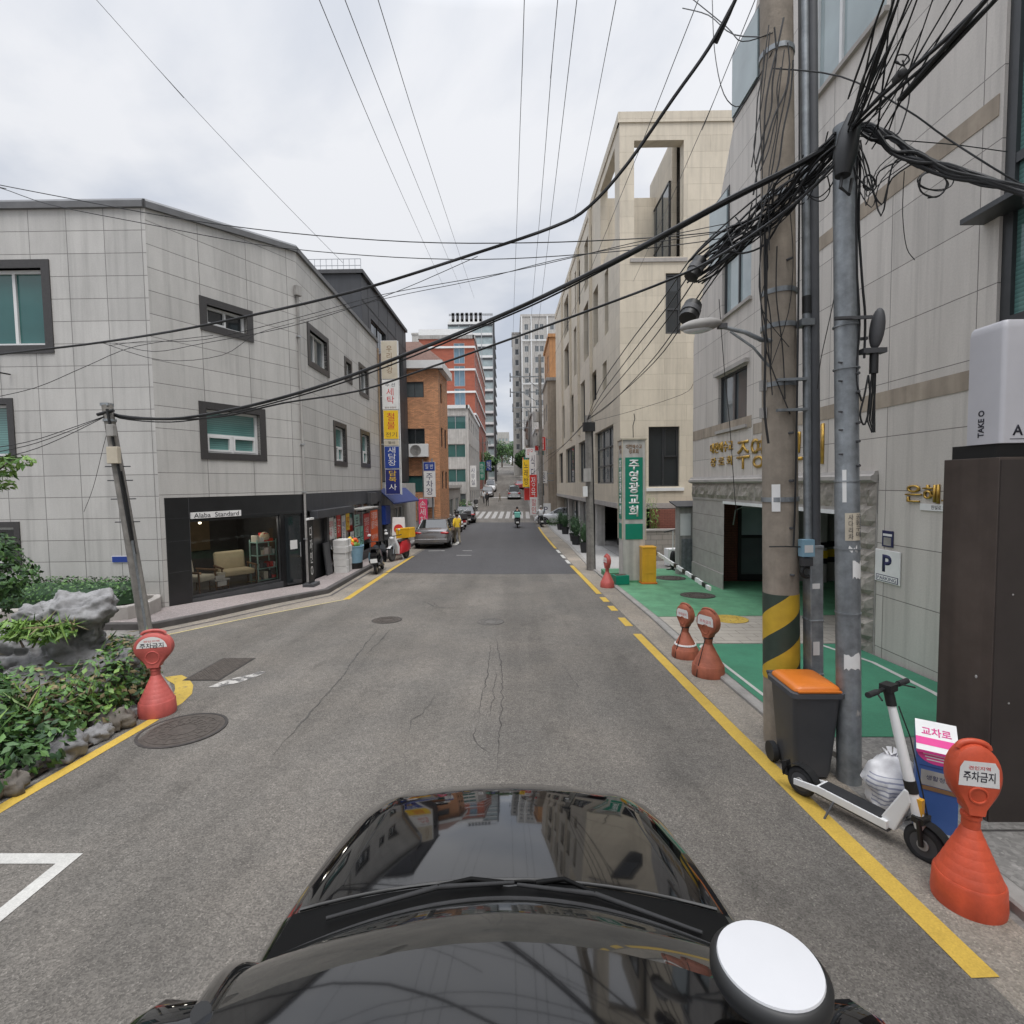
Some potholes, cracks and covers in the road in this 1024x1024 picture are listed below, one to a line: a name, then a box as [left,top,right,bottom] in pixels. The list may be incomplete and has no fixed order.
manhole cover [468,617,513,627]
manhole cover [372,616,402,624]
manhole cover [134,713,228,749]
crack [473,638,504,778]
manhole cover [718,615,749,623]
